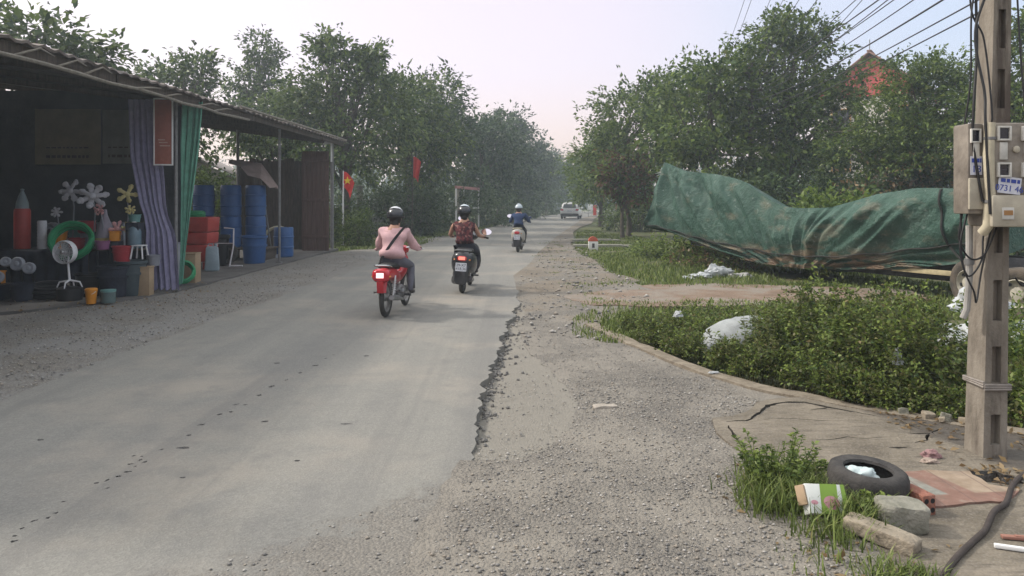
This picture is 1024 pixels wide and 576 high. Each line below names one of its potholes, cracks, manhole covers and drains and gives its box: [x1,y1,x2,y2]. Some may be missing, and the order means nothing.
crack [726,401,959,449]
